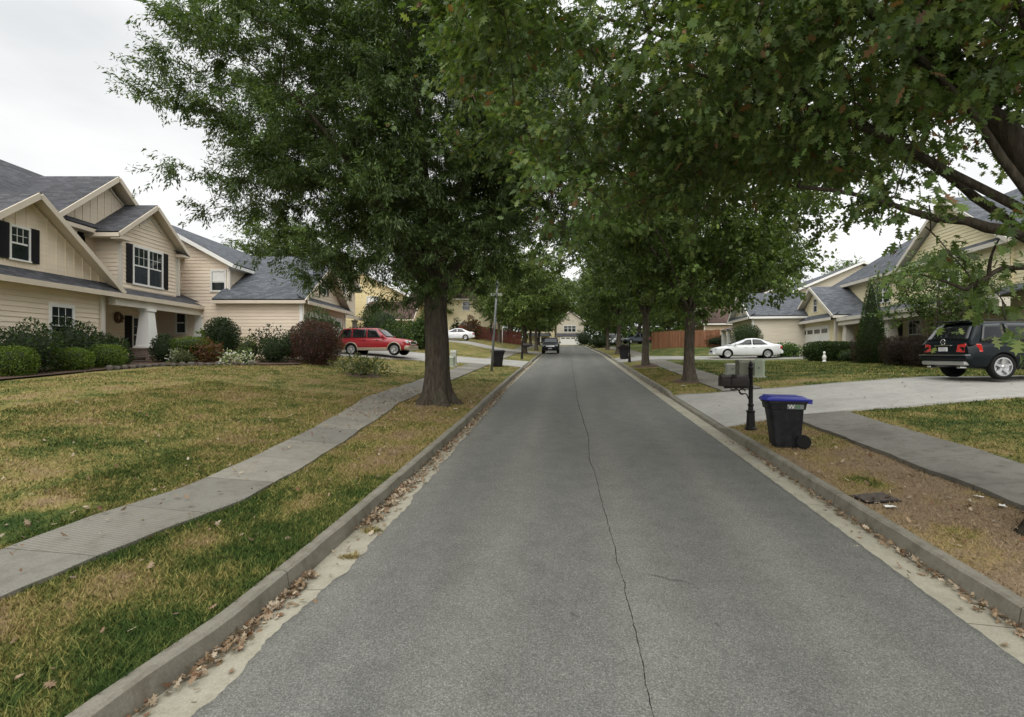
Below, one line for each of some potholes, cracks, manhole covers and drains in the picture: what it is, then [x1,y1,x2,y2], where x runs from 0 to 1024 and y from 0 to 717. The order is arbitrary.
crack [475,355,654,717]
